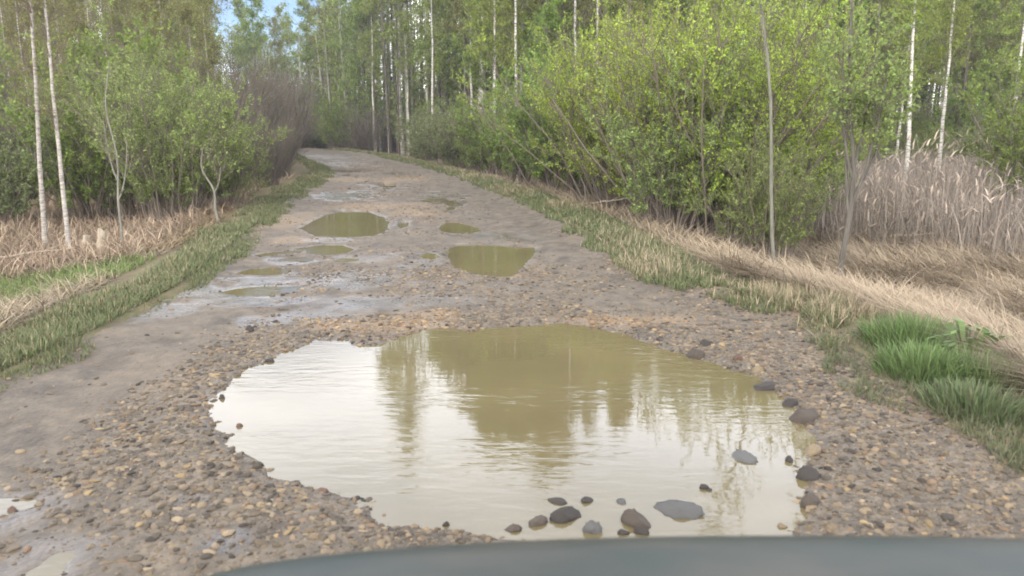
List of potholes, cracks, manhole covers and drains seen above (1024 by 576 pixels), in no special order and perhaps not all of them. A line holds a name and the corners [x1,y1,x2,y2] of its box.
pothole [439,222,483,233]
pothole [295,245,354,255]
pothole [298,210,389,237]
pothole [447,244,536,277]
pothole [238,268,292,276]
pothole [221,286,304,296]
pothole [203,322,816,541]
